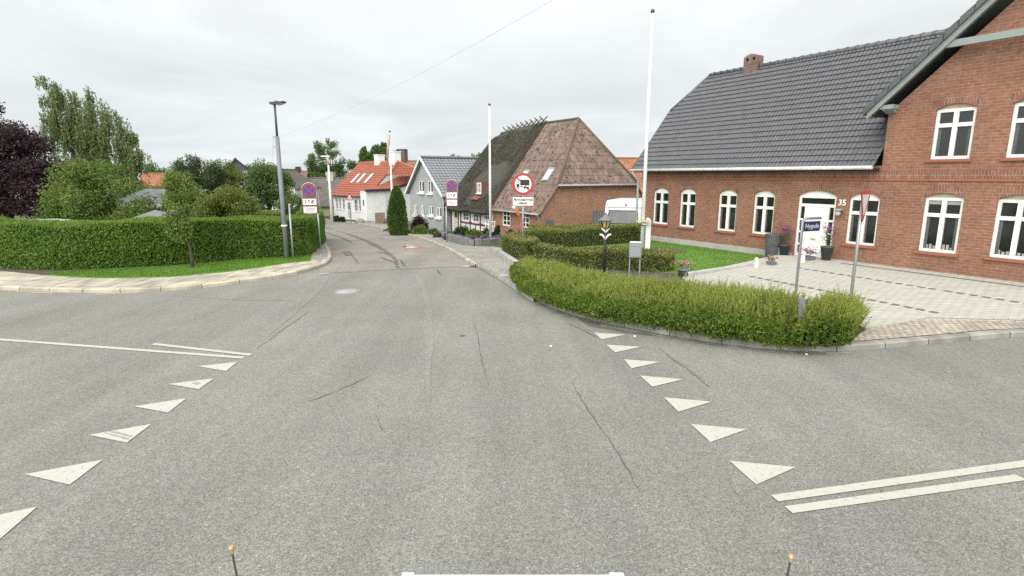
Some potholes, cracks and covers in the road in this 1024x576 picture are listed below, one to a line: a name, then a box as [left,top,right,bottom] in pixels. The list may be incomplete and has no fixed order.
crack [659,347,710,387]
crack [352,232,408,266]
crack [573,385,641,493]
crack [257,313,306,348]
